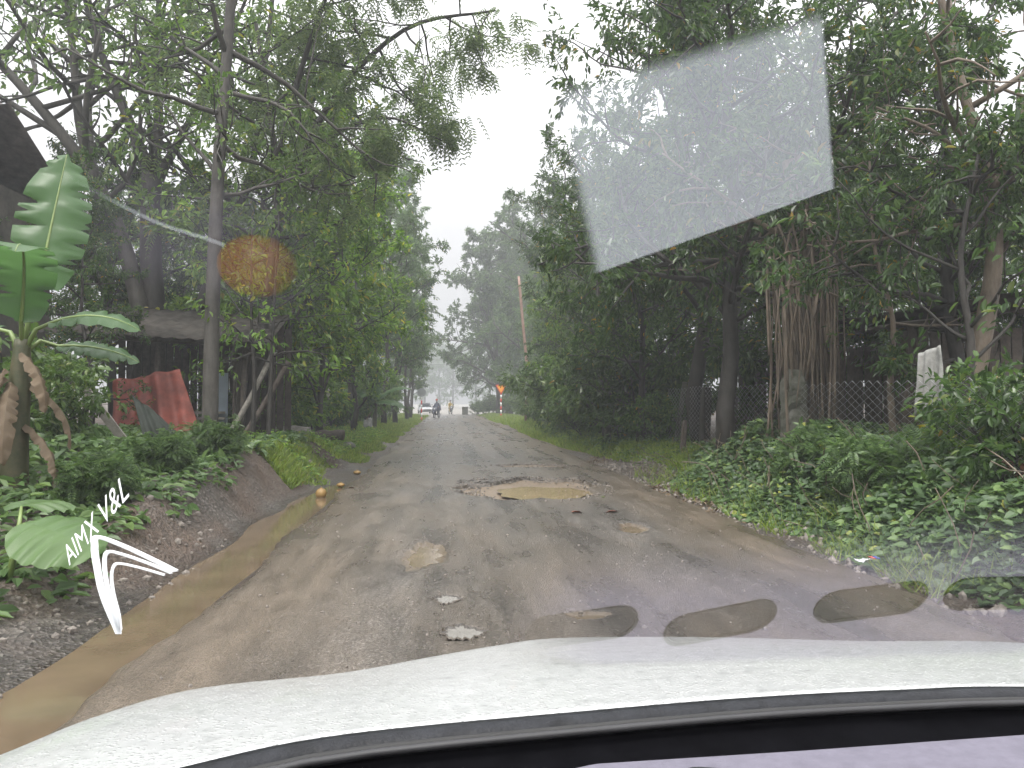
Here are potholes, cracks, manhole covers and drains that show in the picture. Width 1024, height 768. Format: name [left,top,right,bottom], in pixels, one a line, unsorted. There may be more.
pothole [440,623,487,641]
pothole [557,609,623,620]
pothole [433,594,464,605]
pothole [392,536,456,577]
pothole [443,476,615,502]
pothole [614,520,657,534]
